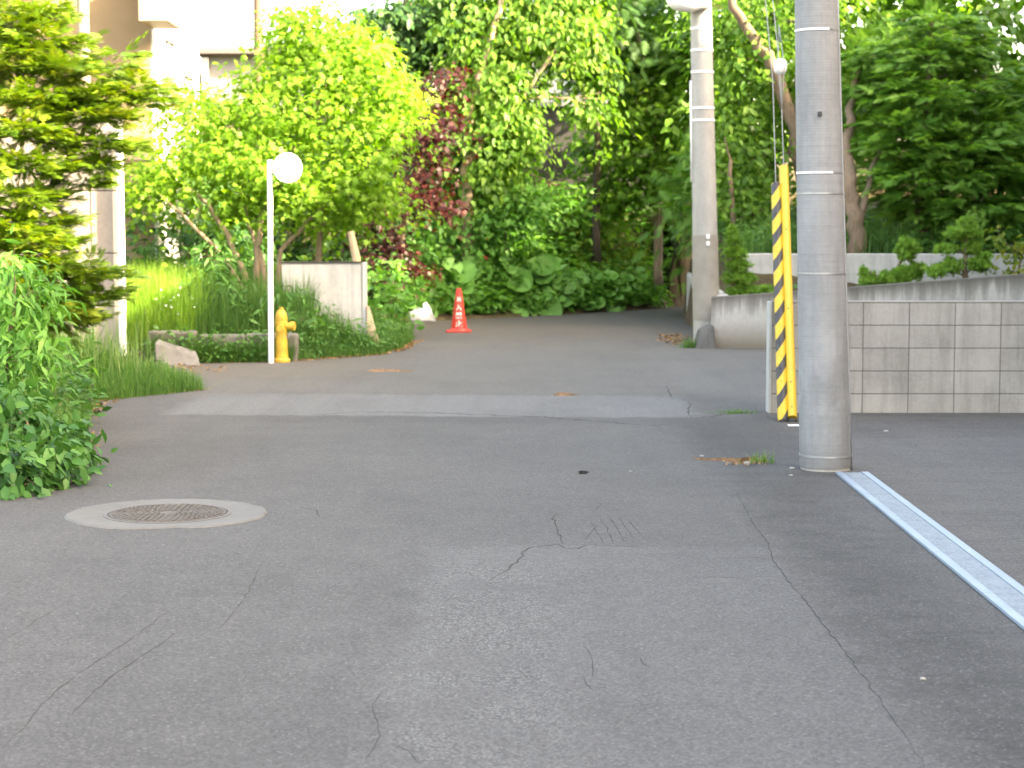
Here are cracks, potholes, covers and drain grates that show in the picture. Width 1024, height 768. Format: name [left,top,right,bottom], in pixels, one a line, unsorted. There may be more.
crack [220,559,266,627]
crack [728,493,925,768]
crack [4,610,185,746]
crack [490,503,648,580]
crack [361,690,422,768]
manhole cover [64,499,267,530]
crack [582,645,647,692]
